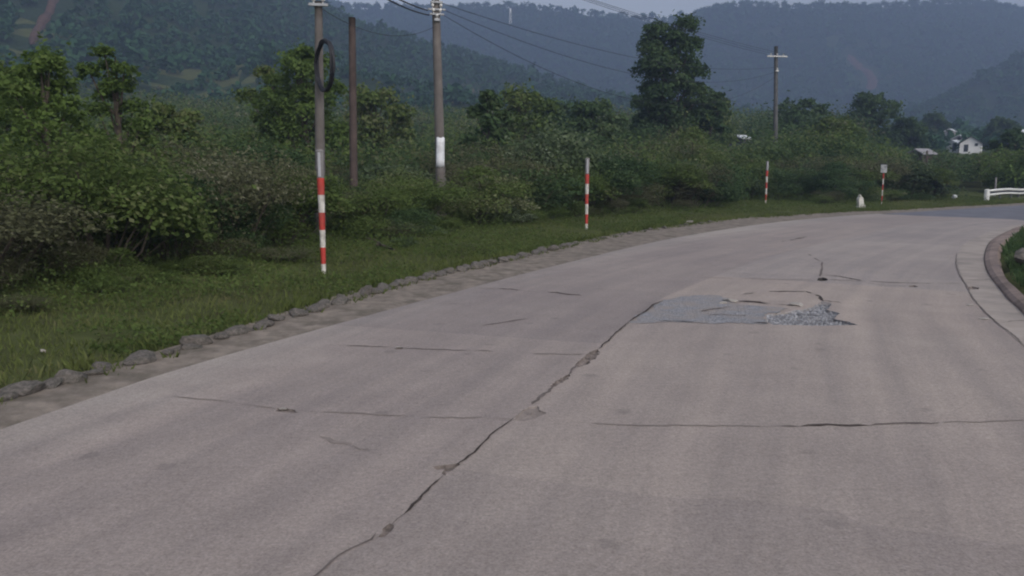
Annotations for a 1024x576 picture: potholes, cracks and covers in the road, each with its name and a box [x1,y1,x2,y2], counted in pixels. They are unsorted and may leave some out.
crack [702,237,928,323]
